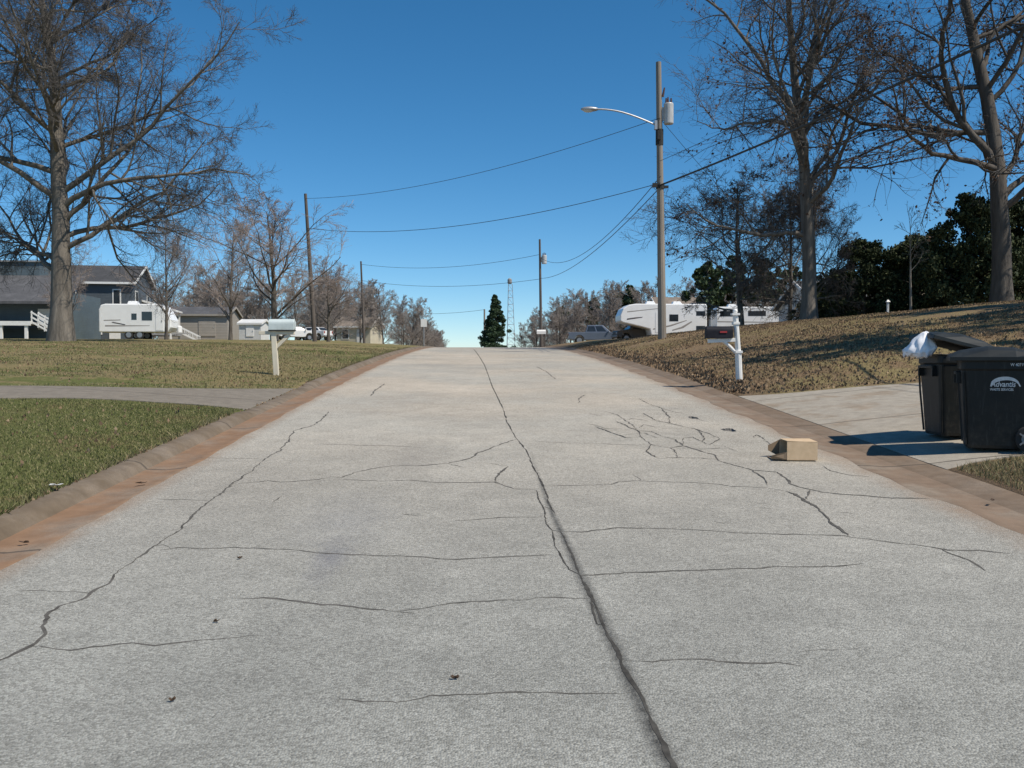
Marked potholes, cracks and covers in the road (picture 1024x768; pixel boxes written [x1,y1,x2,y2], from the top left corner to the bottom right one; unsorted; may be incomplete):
crack [0,349,1010,768]
